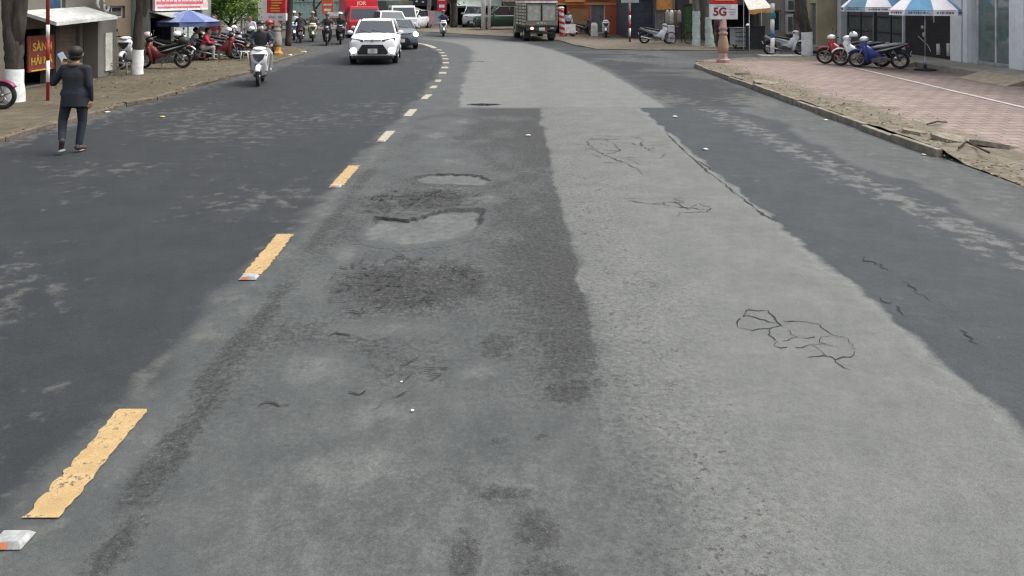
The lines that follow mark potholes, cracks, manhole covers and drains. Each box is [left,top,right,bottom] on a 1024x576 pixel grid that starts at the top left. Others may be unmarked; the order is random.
pothole [405,172,501,187]
crack [862,256,930,315]
crack [586,135,666,174]
crack [630,197,711,213]
crack [736,309,855,370]
pothole [345,206,493,252]
